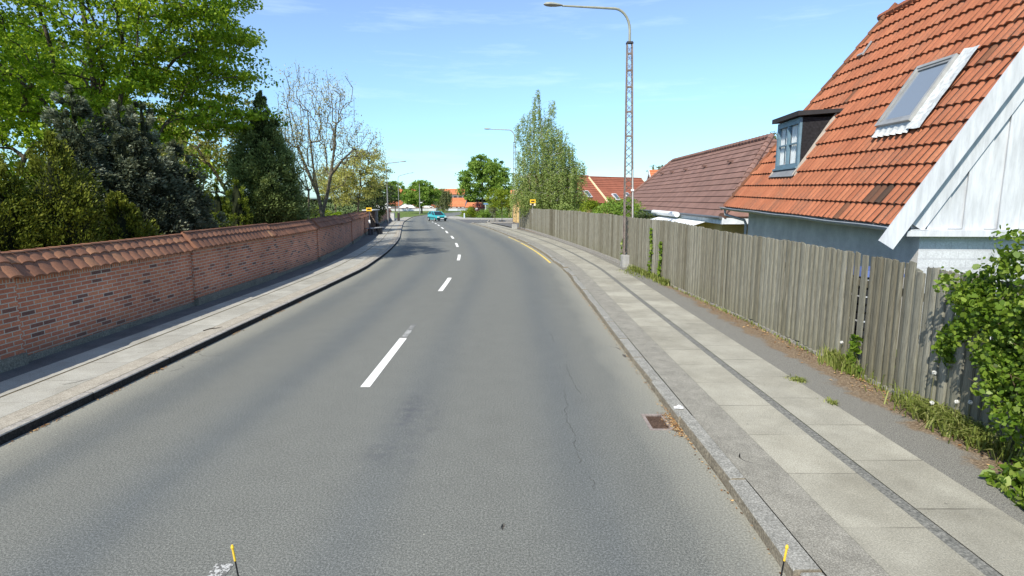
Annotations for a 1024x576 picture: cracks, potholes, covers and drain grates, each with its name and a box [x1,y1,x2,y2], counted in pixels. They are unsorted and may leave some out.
drain grate [641,414,674,430]
